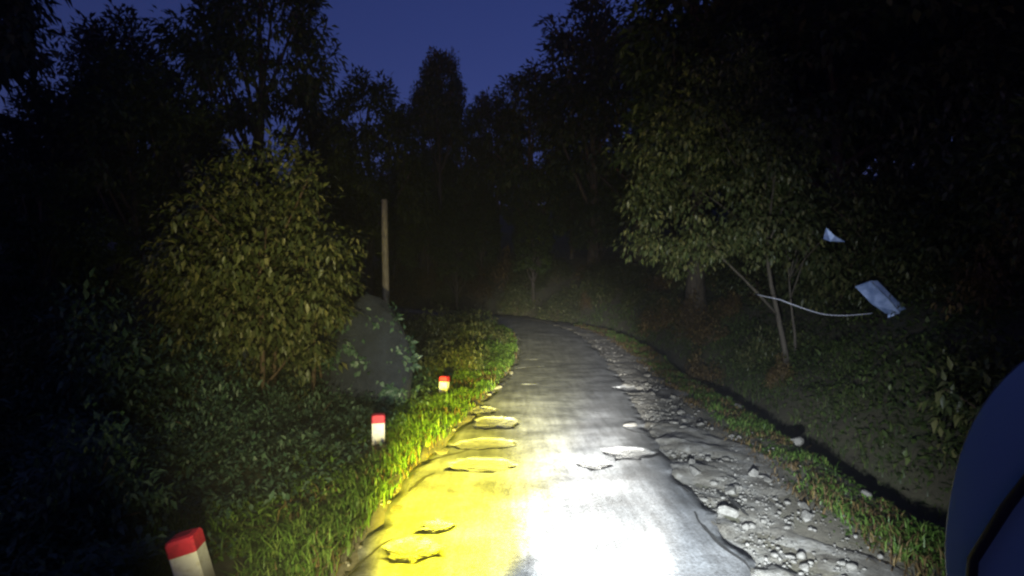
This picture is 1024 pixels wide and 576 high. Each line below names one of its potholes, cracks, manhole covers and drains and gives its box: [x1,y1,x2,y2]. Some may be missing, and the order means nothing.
pothole [602,448,654,460]
pothole [450,459,517,472]
pothole [474,418,518,429]
crack [681,460,751,571]
pothole [386,540,438,564]
pothole [453,439,515,450]
pothole [472,406,496,414]
pothole [577,457,610,469]
pothole [424,522,453,532]
